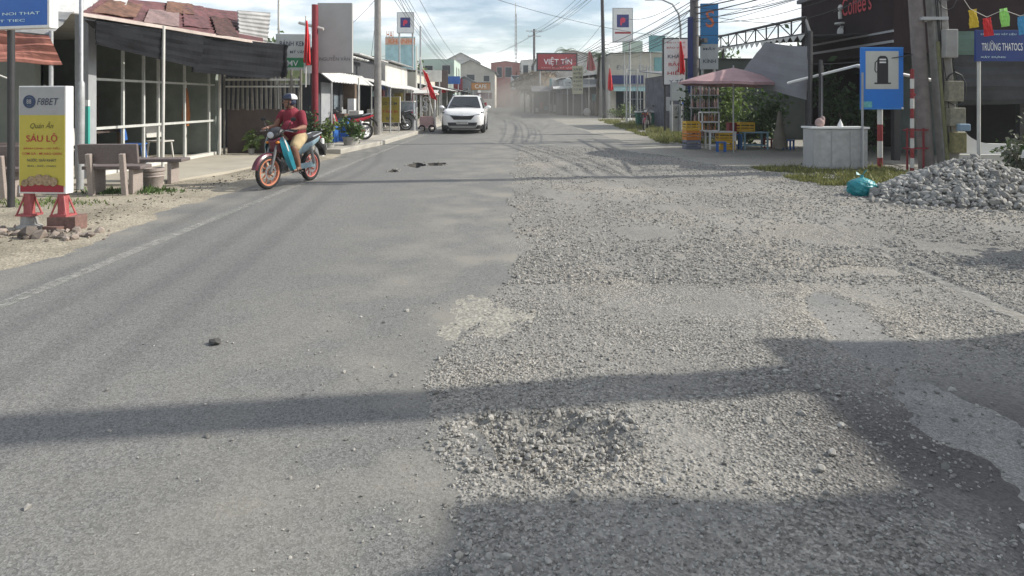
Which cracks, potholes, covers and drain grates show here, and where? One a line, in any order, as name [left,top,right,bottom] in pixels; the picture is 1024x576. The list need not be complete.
pothole [424,401,650,489]
